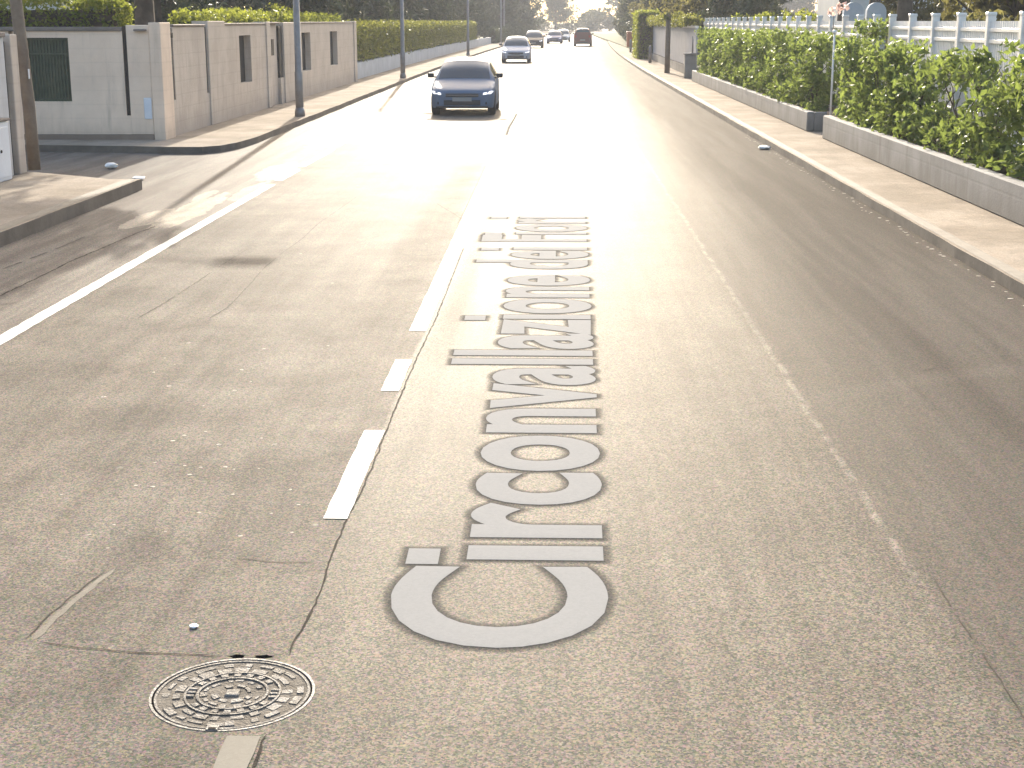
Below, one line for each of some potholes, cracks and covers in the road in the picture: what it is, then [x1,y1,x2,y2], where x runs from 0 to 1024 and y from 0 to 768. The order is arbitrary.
crack [244,248,464,653]
manhole cover [149,658,315,732]
crack [138,197,356,318]
crack [0,227,153,305]
crack [933,577,1024,718]
